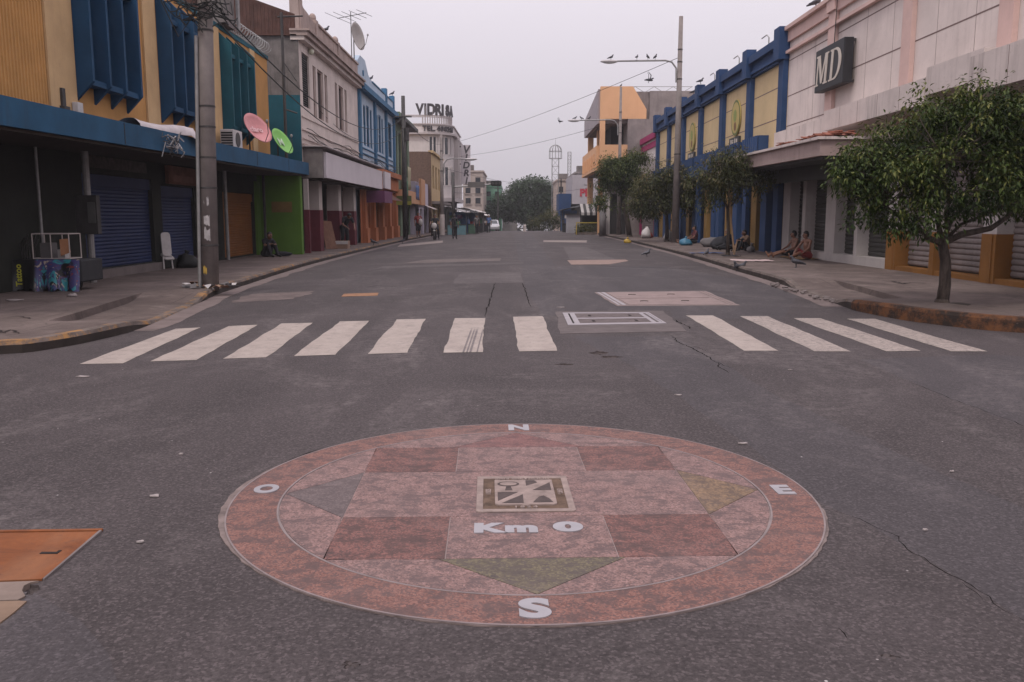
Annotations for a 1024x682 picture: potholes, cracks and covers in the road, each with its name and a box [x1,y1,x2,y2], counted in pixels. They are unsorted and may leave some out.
manhole cover [0,528,103,582]
utility cover [555,311,686,334]
crack [673,320,729,373]
crack [826,507,1023,620]
